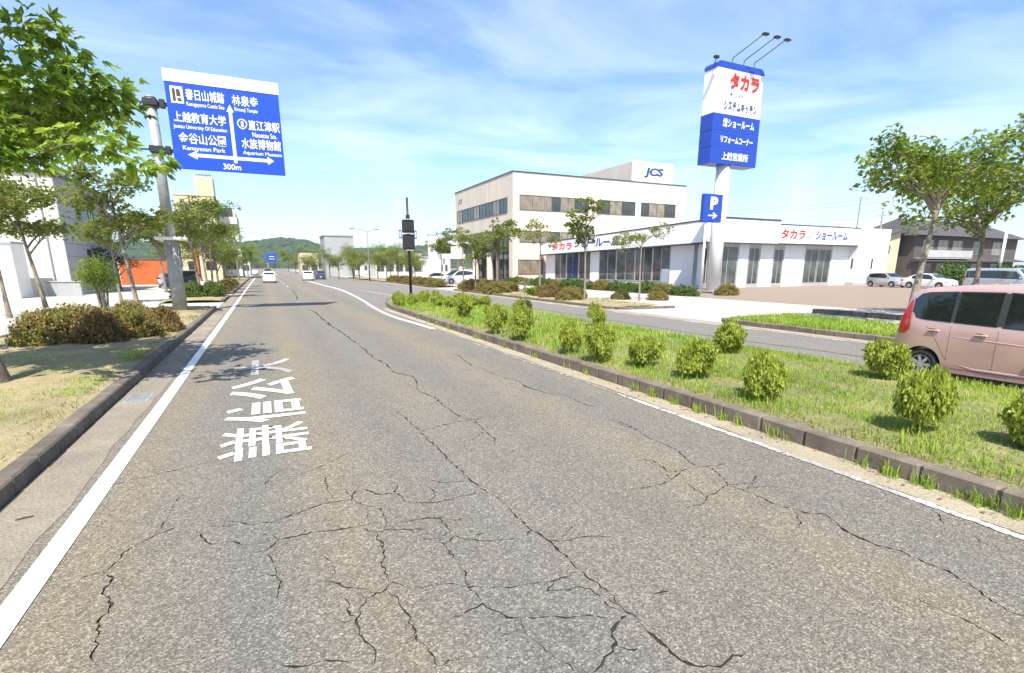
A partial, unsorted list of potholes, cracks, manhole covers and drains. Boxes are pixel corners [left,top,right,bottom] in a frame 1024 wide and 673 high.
crack [915,597,1024,653]
crack [83,494,183,668]
crack [211,411,745,672]
crack [608,419,1024,616]
crack [451,353,595,407]
crack [196,531,251,545]
